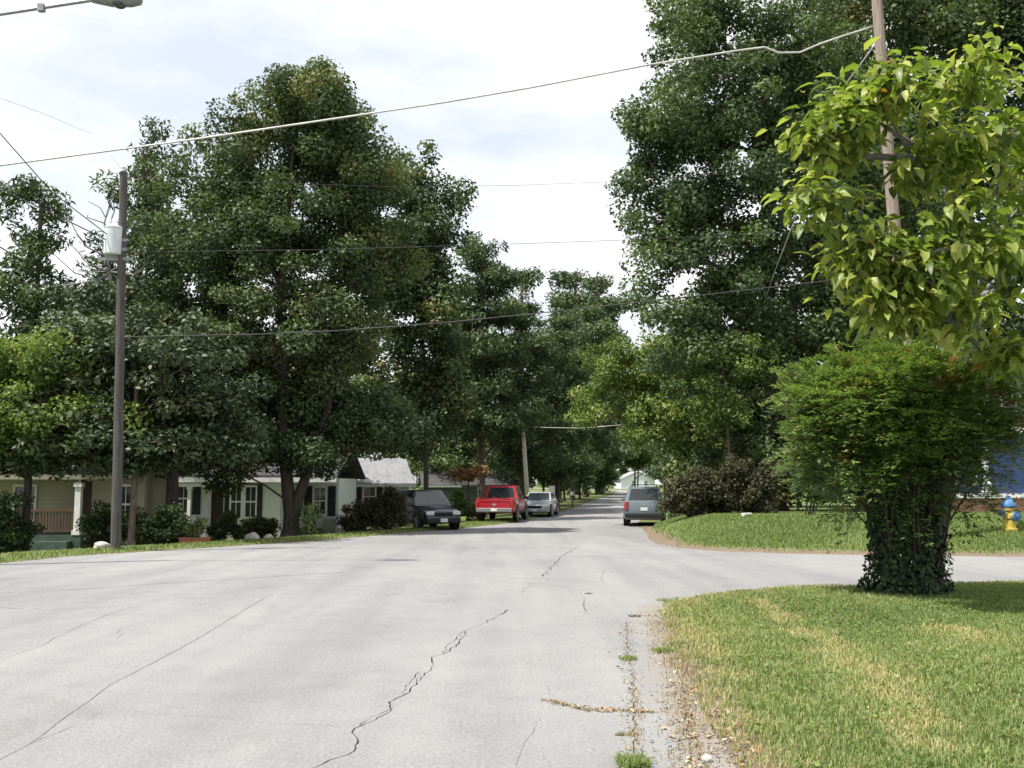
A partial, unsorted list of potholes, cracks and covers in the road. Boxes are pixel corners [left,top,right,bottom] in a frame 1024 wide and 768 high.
crack [15,607,130,655]
crack [314,610,508,768]
